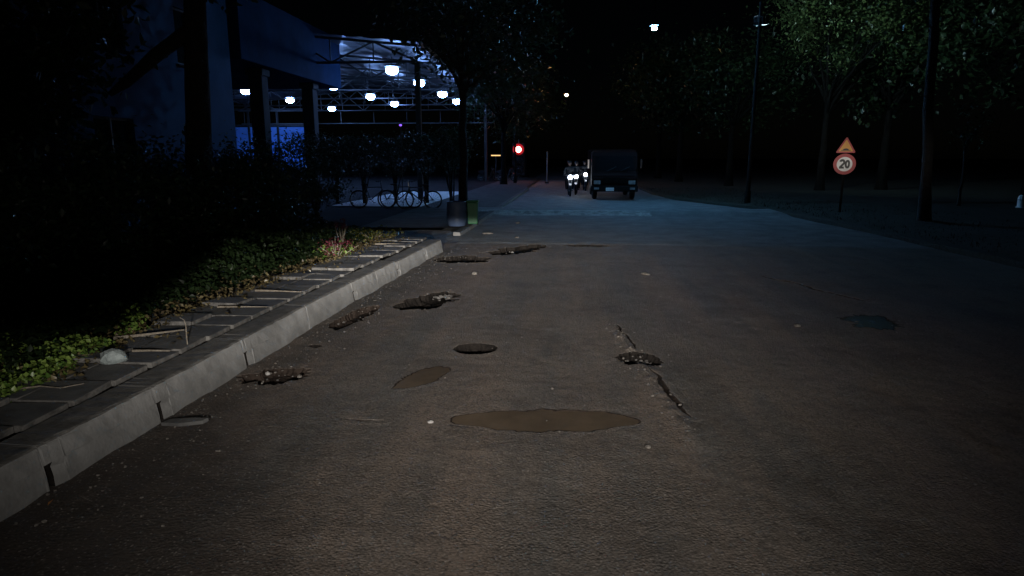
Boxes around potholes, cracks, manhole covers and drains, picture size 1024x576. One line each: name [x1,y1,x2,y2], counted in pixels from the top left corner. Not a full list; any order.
crack [756,275,883,303]
pothole [388,290,465,311]
pothole [446,341,504,356]
pothole [386,364,457,391]
pothole [442,405,649,436]
pothole [483,244,549,256]
pothole [608,347,671,368]
pothole [230,365,321,389]
pothole [429,255,494,264]
crack [609,322,703,422]
pothole [324,304,383,332]
